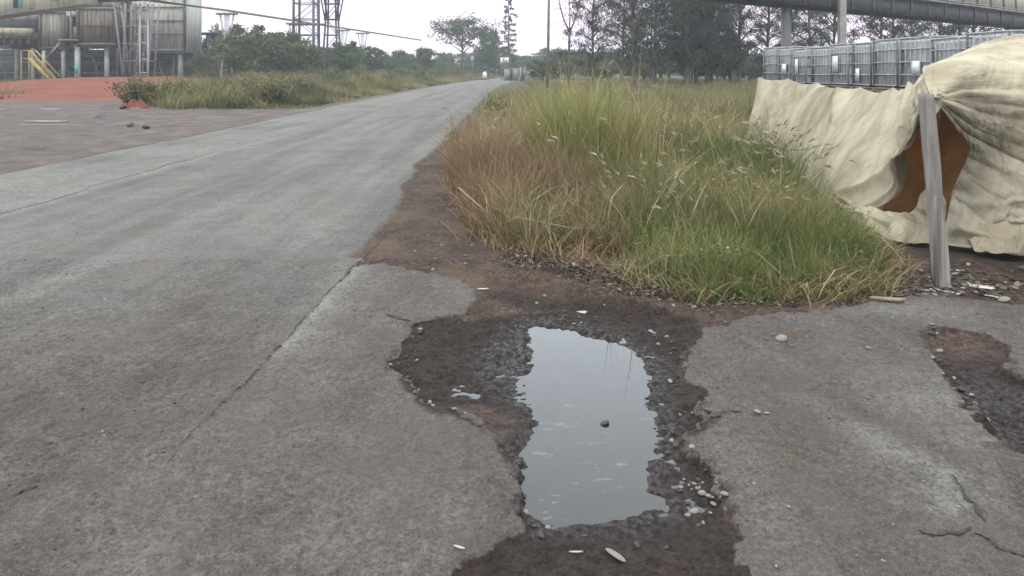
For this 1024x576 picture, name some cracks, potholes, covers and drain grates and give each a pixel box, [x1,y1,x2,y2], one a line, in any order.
pothole [921,325,1024,455]
pothole [383,311,728,549]
crack [919,475,1024,557]
